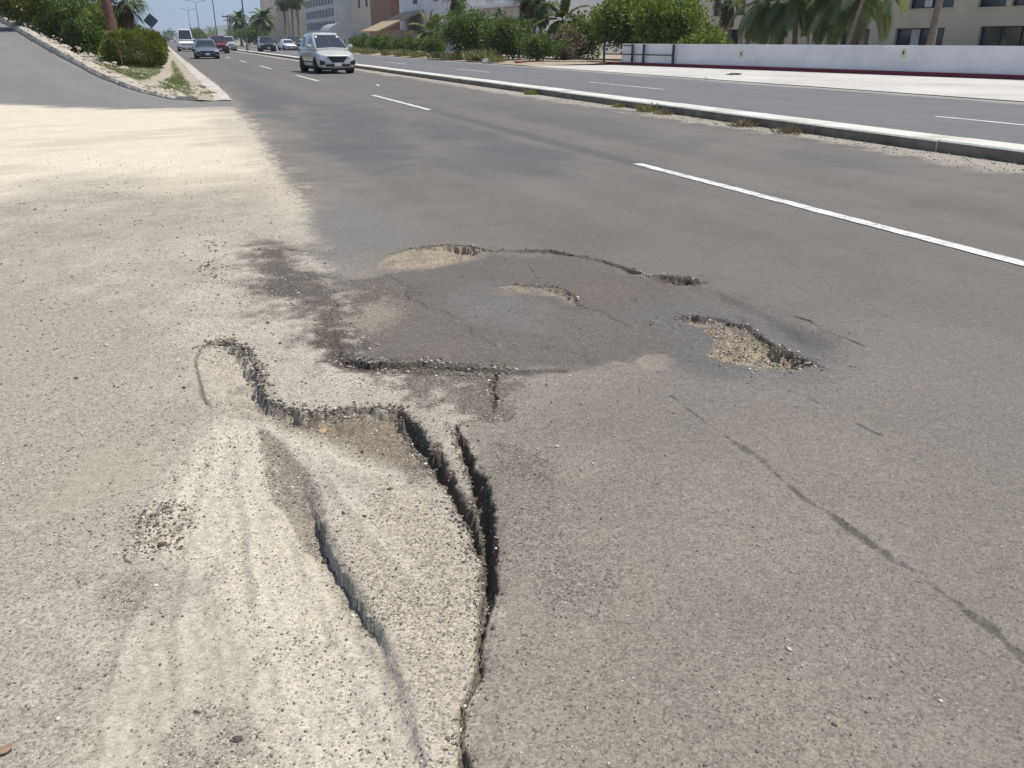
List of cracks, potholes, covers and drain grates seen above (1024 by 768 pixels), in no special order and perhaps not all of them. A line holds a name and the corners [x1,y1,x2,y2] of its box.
pothole [673,315,814,372]
crack [790,315,867,347]
pothole [484,285,586,309]
crack [498,249,643,281]
crack [854,422,883,436]
pothole [374,244,490,271]
crack [310,335,606,768]
